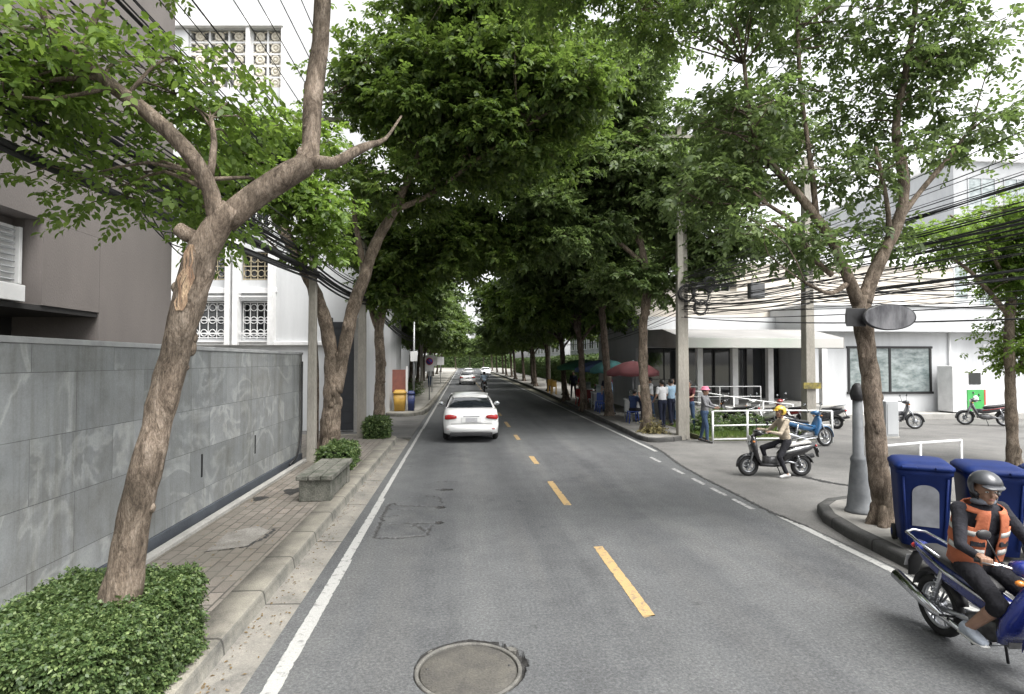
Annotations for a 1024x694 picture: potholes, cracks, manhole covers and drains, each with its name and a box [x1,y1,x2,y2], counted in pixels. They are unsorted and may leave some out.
manhole cover [414,642,522,694]
